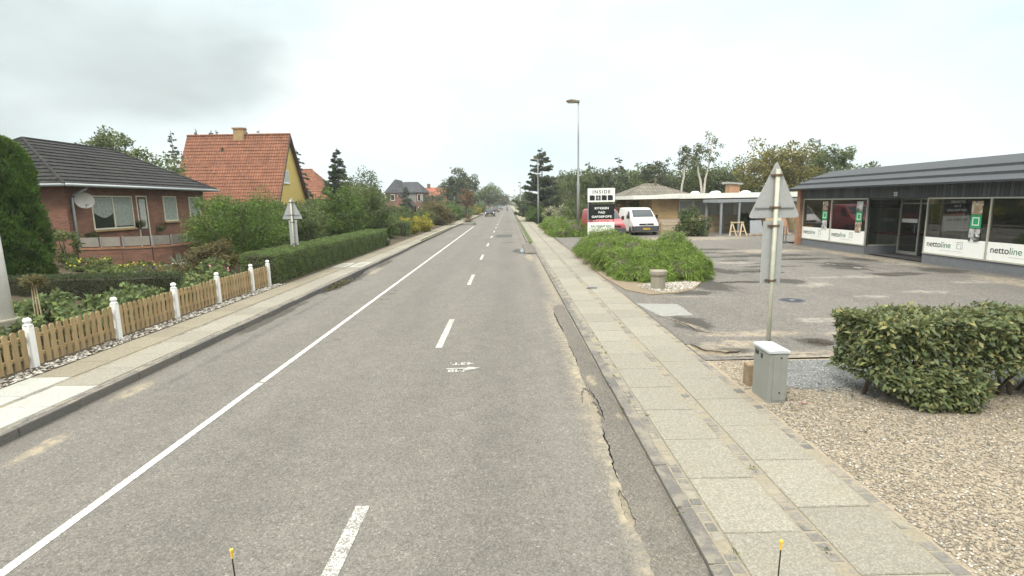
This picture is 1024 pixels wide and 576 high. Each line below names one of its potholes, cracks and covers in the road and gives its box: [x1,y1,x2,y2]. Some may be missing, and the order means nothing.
crack [589,390,620,482]
